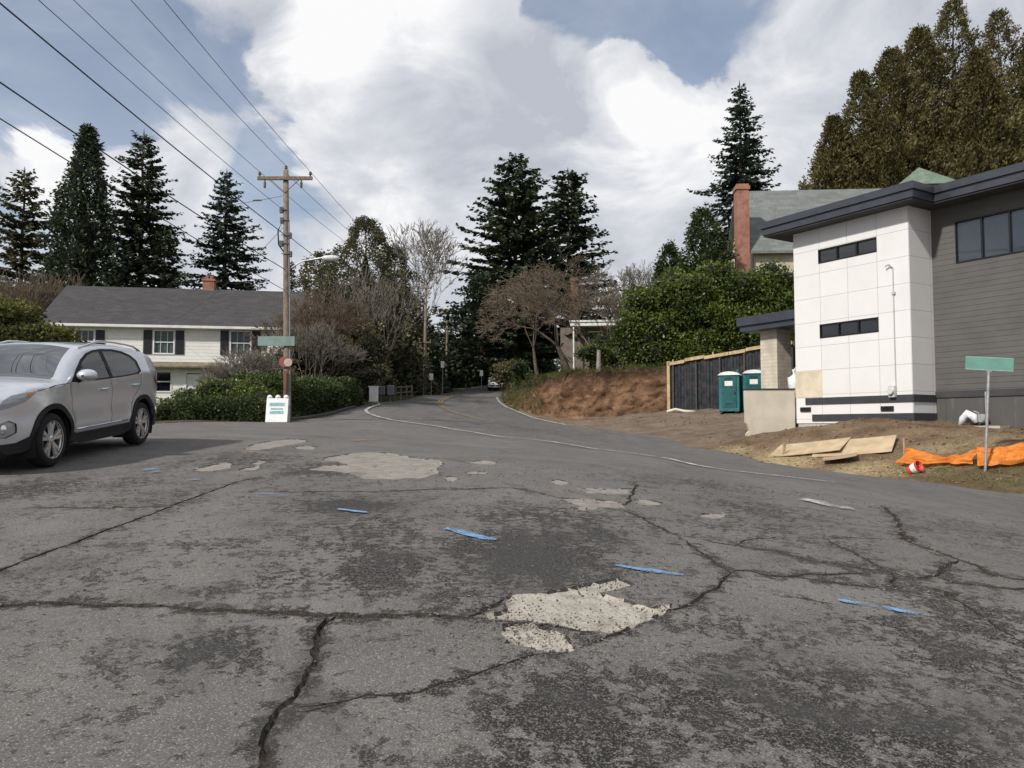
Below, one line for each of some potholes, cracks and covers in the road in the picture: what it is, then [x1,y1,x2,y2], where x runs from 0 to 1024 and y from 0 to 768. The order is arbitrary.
crack [0,484,1024,768]
